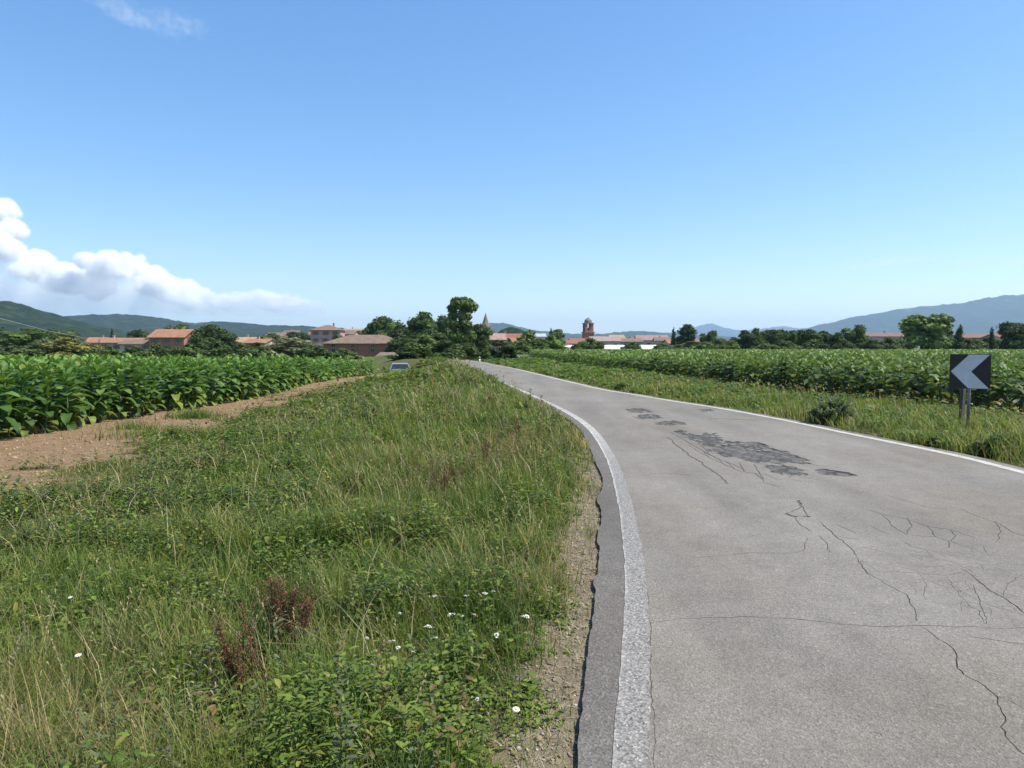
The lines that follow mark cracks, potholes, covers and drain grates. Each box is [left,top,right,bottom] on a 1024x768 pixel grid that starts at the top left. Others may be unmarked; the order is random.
crack [646,432,829,487]
crack [647,495,1024,767]
